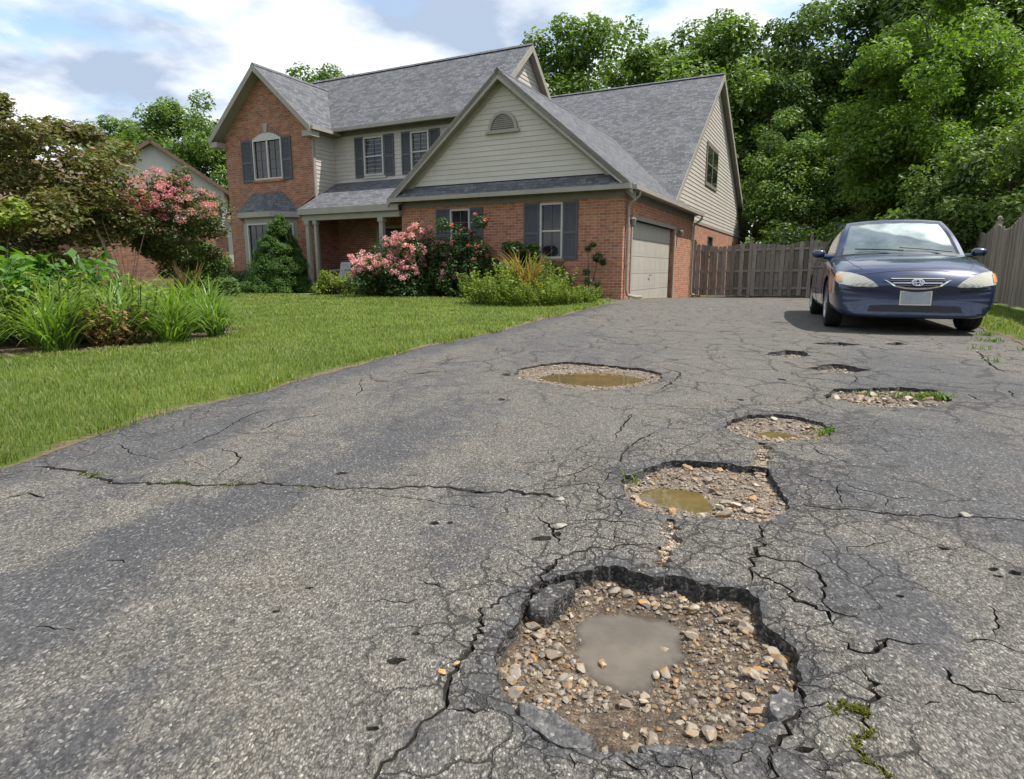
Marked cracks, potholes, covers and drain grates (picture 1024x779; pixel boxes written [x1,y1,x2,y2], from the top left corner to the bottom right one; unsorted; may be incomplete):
pothole [808,364,869,373]
pothole [514,362,663,390]
pothole [765,350,811,358]
pothole [494,565,803,767]
pothole [724,414,841,445]
crack [925,604,1024,705]
crack [6,409,923,779]
pothole [614,460,790,523]
pothole [823,387,960,408]
